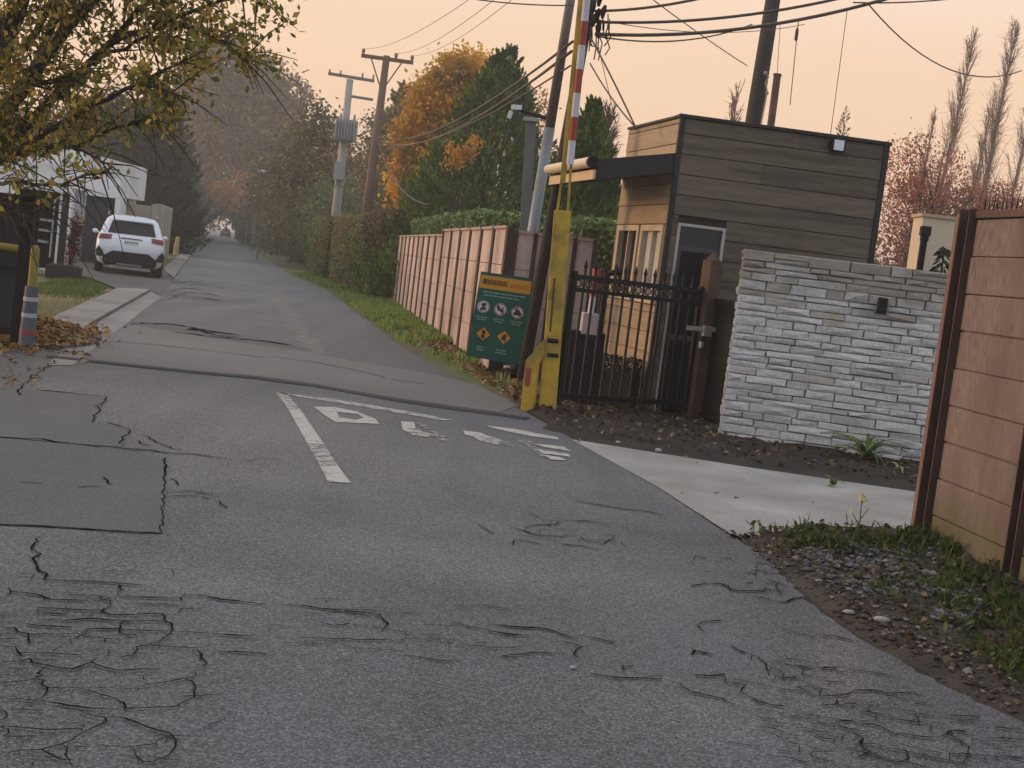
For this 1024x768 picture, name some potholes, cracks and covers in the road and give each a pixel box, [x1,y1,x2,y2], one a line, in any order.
crack [621,620,1024,768]
crack [0,536,658,767]
crack [690,556,809,602]
crack [478,500,664,551]
